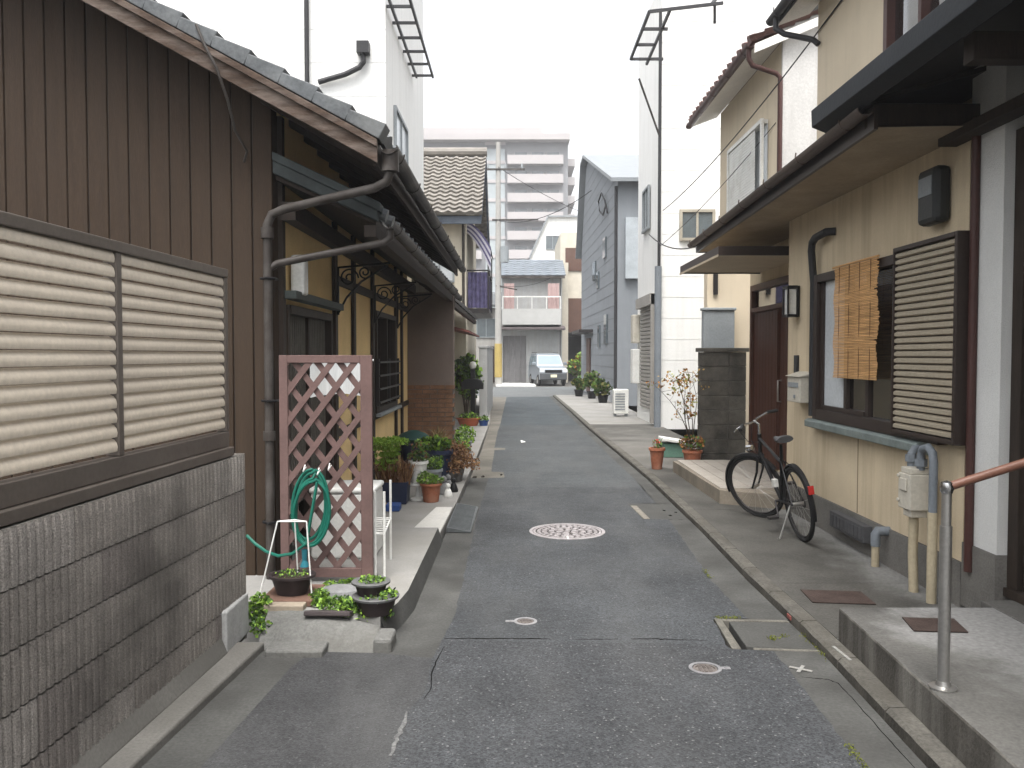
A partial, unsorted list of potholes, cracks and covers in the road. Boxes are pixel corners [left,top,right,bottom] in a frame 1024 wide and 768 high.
crack [424,638,683,699]
utility cover [689,662,731,674]
manhole cover [529,523,605,540]
utility cover [505,617,537,625]
crack [806,677,915,768]
